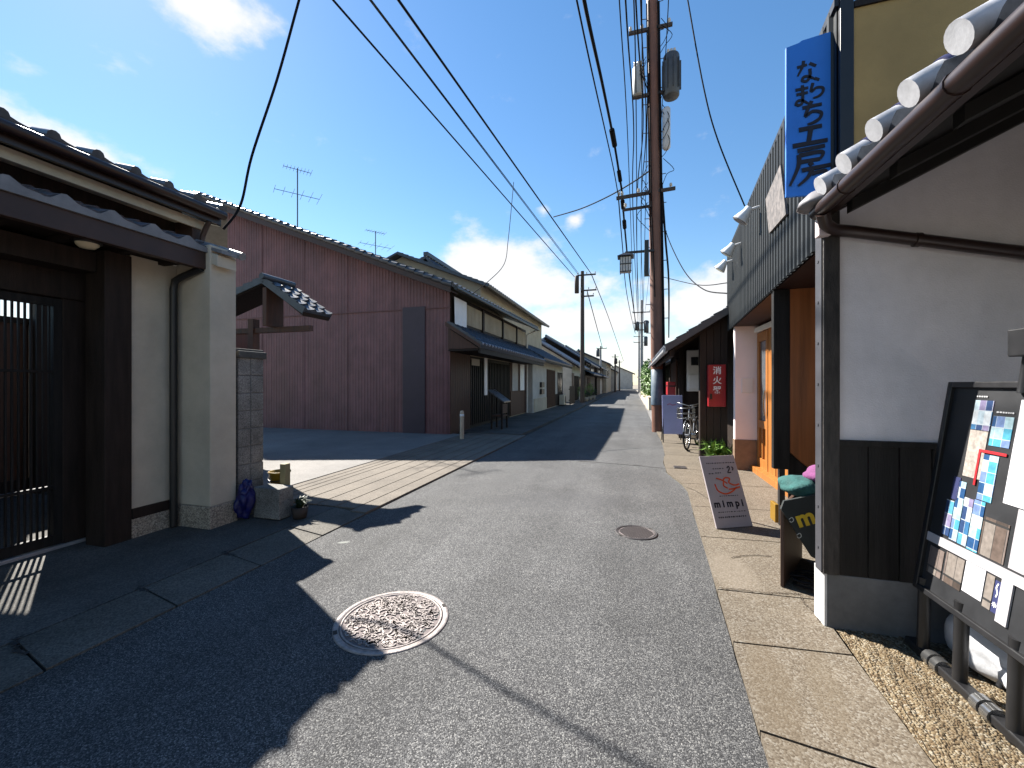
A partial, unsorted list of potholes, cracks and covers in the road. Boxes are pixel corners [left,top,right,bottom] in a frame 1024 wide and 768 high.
manhole cover [332,591,449,656]
manhole cover [615,525,658,540]
